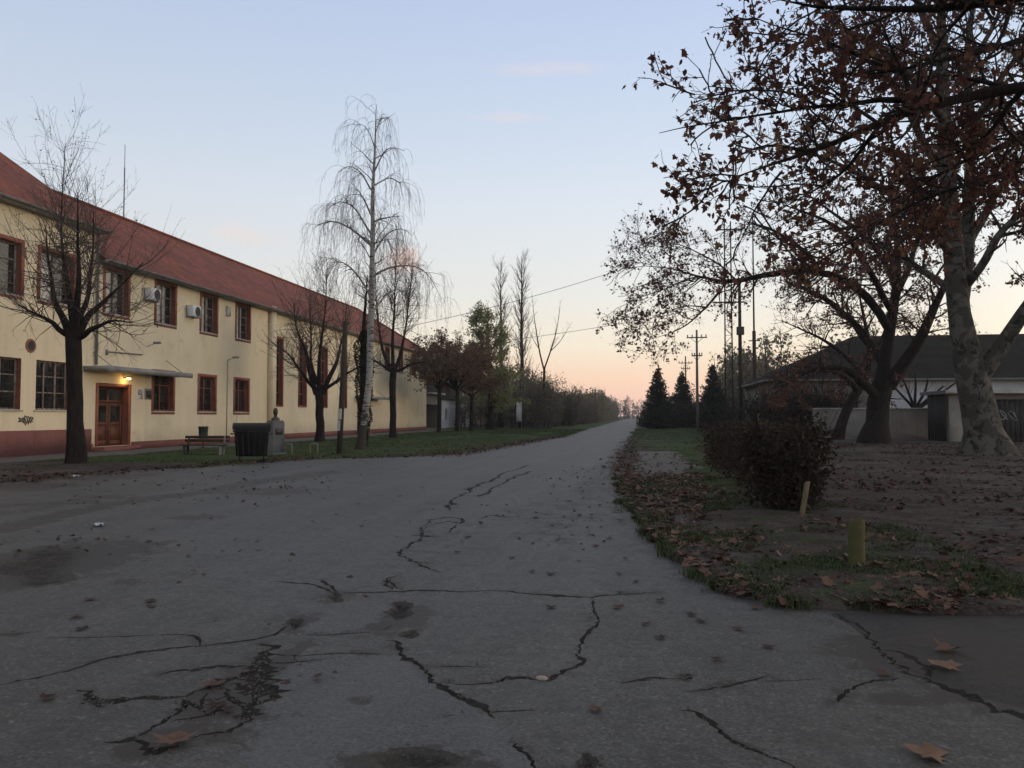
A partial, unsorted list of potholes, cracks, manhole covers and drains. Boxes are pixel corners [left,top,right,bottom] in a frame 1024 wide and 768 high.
pothole [366,746,466,768]
pothole [397,630,420,639]
crack [825,612,1024,720]
crack [678,710,796,768]
pothole [384,601,414,620]
crack [0,465,655,755]
